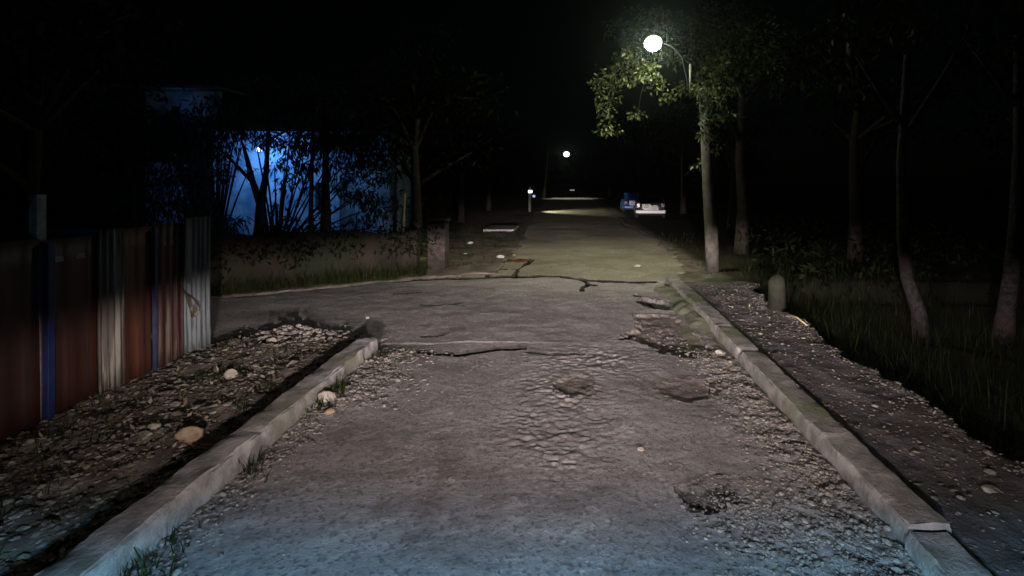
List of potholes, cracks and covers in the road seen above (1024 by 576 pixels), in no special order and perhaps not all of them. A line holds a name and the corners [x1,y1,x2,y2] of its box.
crack [393,260,658,306]
pothole [548,374,597,398]
pothole [631,294,672,311]
crack [382,332,597,357]
pothole [616,313,716,360]
pothole [652,376,733,403]
pothole [673,477,751,517]
